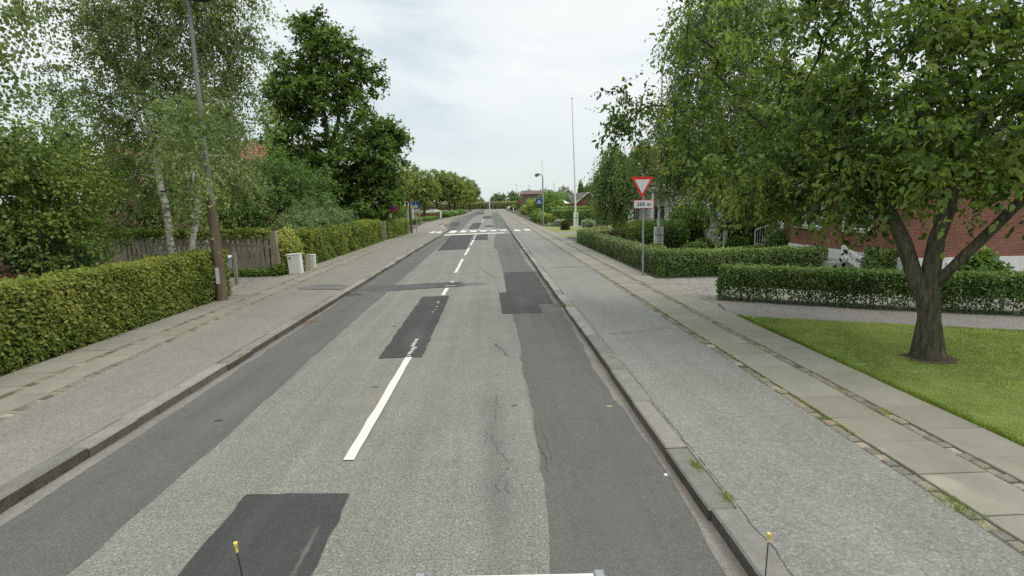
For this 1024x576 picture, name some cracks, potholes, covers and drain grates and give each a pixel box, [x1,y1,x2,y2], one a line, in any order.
crack [484,377,518,494]
